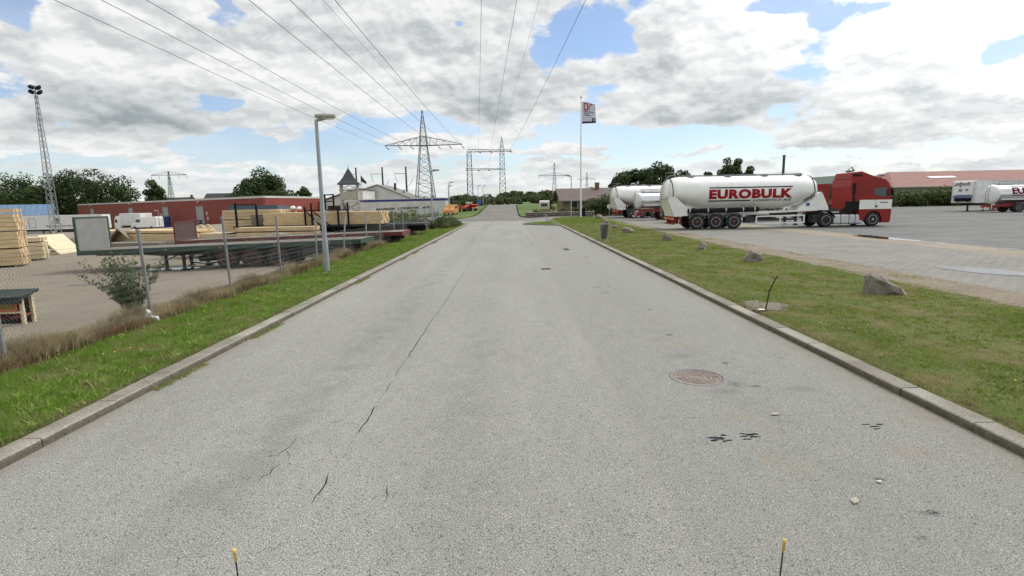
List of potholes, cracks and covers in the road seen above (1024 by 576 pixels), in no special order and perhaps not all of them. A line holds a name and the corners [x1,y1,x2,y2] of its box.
manhole cover [669,368,727,386]
crack [312,255,475,503]
crack [257,438,296,483]
